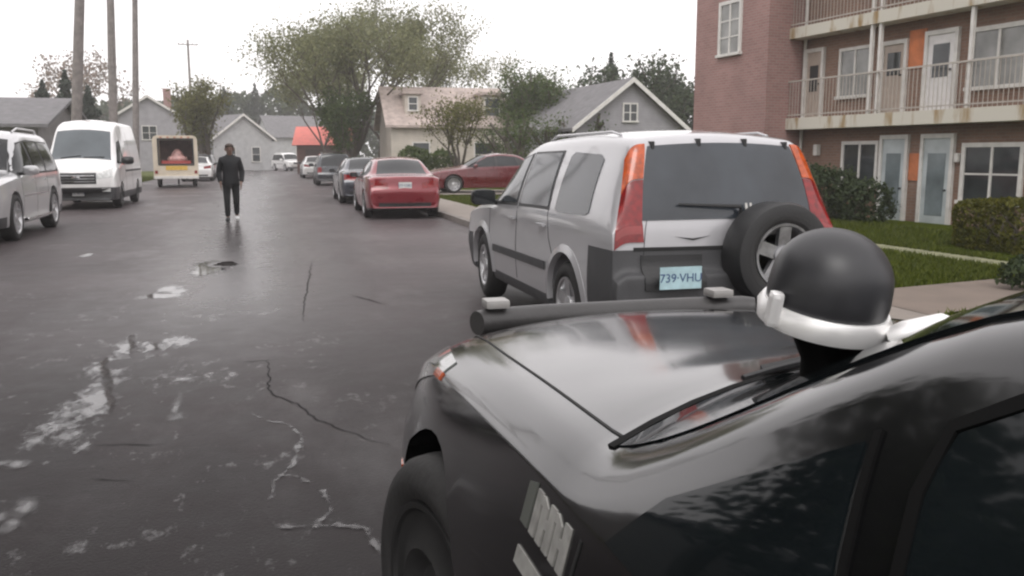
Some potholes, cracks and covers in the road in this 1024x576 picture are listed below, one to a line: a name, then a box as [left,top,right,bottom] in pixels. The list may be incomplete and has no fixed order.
crack [302,267,312,316]
crack [242,360,387,550]
